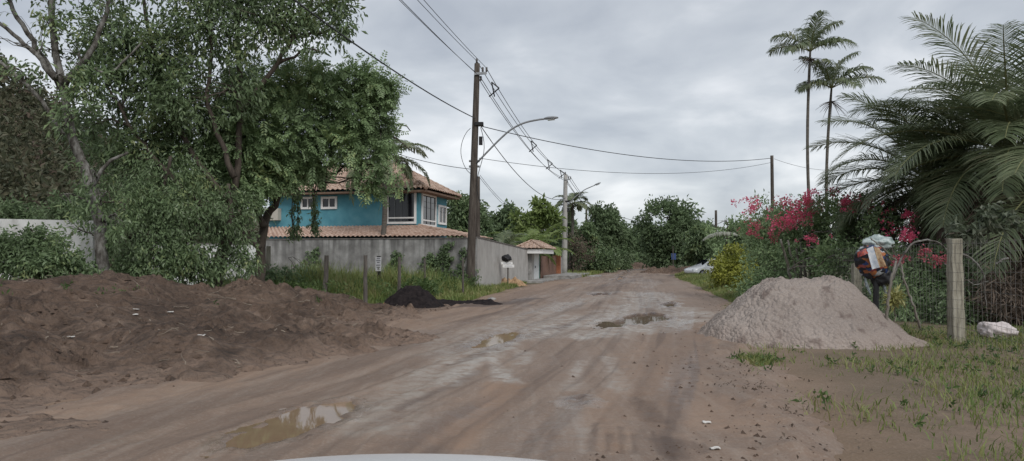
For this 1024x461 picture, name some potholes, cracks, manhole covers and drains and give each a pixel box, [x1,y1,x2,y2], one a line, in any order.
pothole [588,312,681,330]
pothole [452,331,532,351]
pothole [193,395,378,459]
